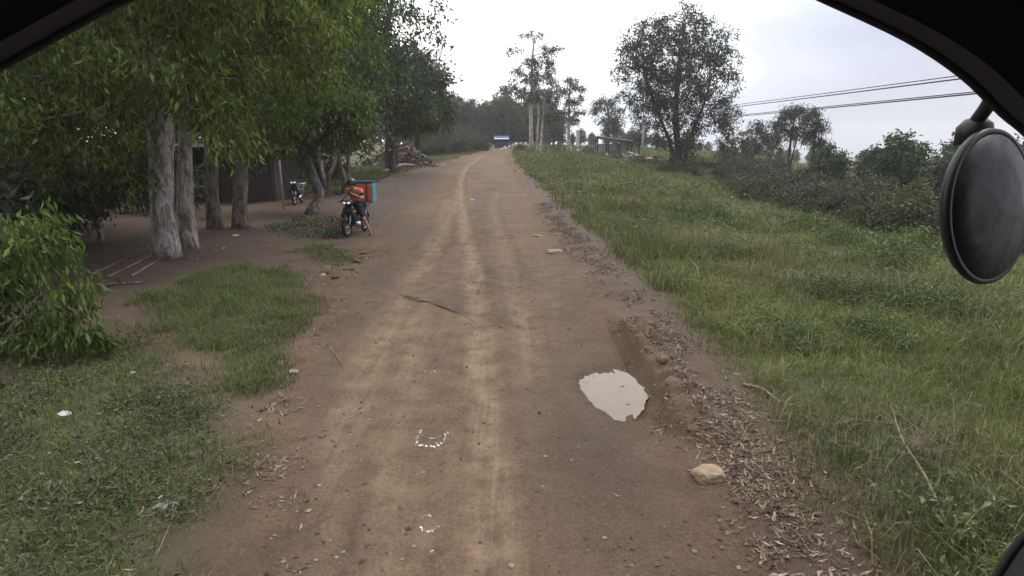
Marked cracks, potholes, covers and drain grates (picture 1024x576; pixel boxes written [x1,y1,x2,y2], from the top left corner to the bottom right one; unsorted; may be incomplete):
pothole [571,367,649,426]
crack [387,287,508,332]
